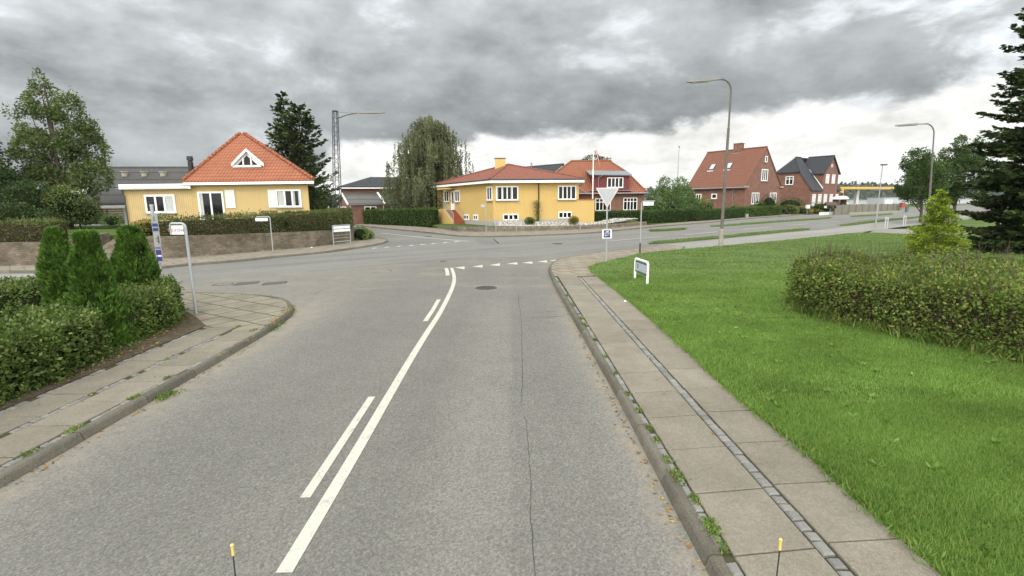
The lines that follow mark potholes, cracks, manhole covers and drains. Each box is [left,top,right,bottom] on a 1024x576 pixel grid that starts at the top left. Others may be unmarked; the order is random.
crack [518,296,559,576]
